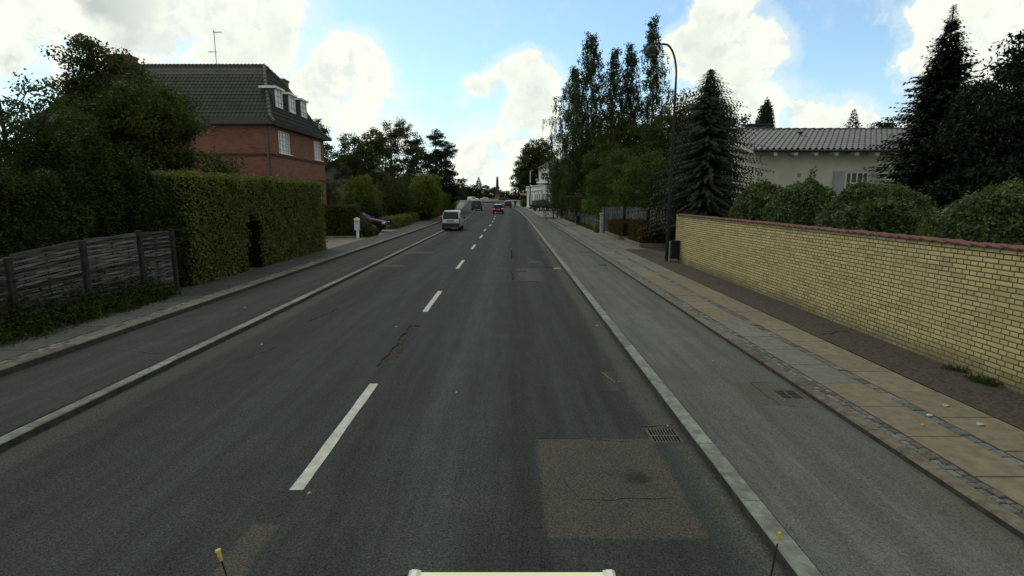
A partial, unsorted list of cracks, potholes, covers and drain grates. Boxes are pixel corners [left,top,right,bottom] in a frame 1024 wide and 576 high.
drain grate [771,390,807,399]
pothole [377,325,420,367]
drain grate [645,428,684,442]
crack [564,480,666,501]
